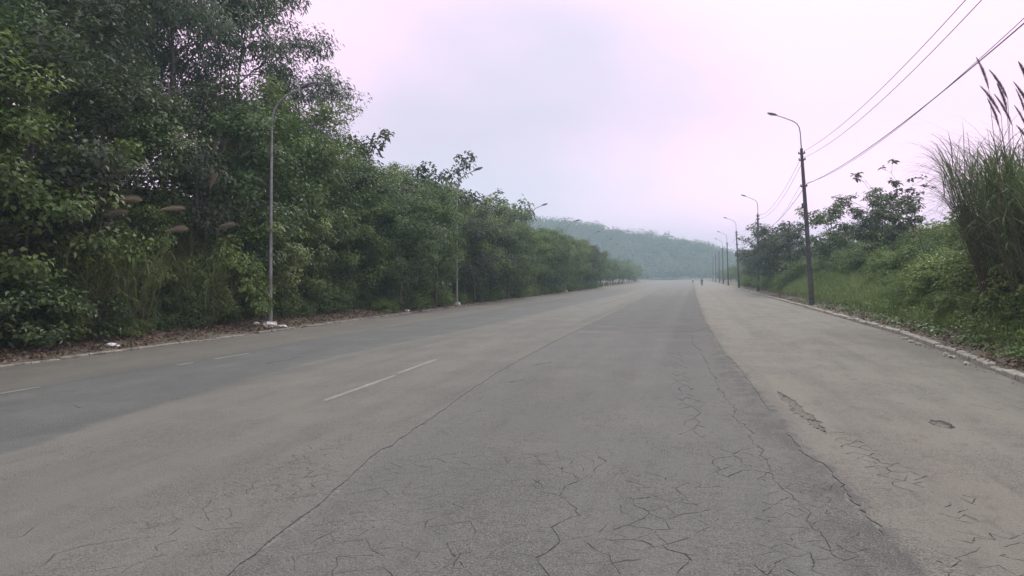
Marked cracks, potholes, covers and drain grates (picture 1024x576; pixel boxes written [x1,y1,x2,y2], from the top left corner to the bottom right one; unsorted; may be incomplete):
crack [492,304,933,576]
pothole [928,420,956,429]
crack [935,495,1024,576]
pothole [777,391,827,433]
crack [38,495,272,573]
crack [290,452,508,576]
crack [246,446,345,503]
